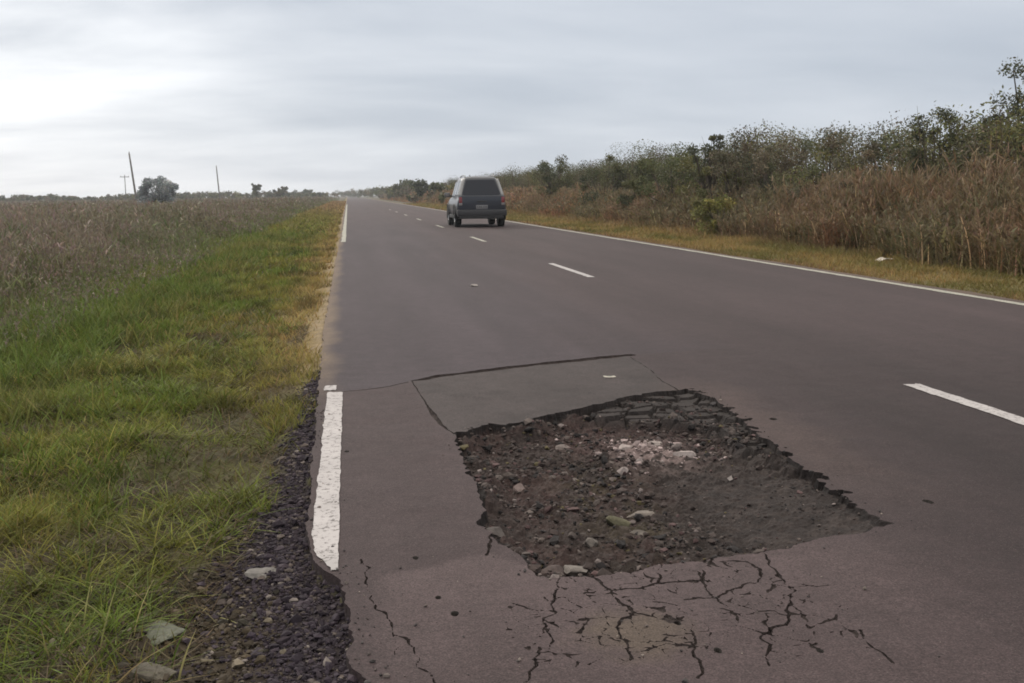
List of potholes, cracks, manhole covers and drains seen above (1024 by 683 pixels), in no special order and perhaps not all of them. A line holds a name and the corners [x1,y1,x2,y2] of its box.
crack [488,553,895,683]
pothole [454,388,895,578]
crack [360,559,436,683]
